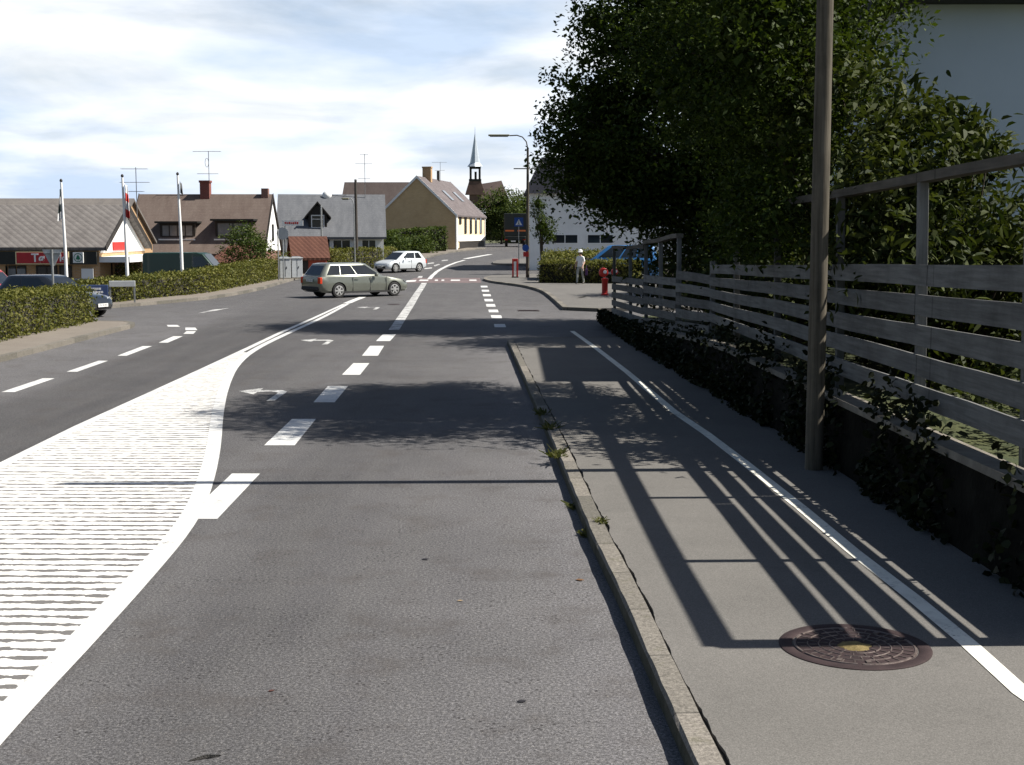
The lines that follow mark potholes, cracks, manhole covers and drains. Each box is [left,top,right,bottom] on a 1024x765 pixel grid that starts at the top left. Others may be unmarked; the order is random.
manhole cover [779,624,933,671]
